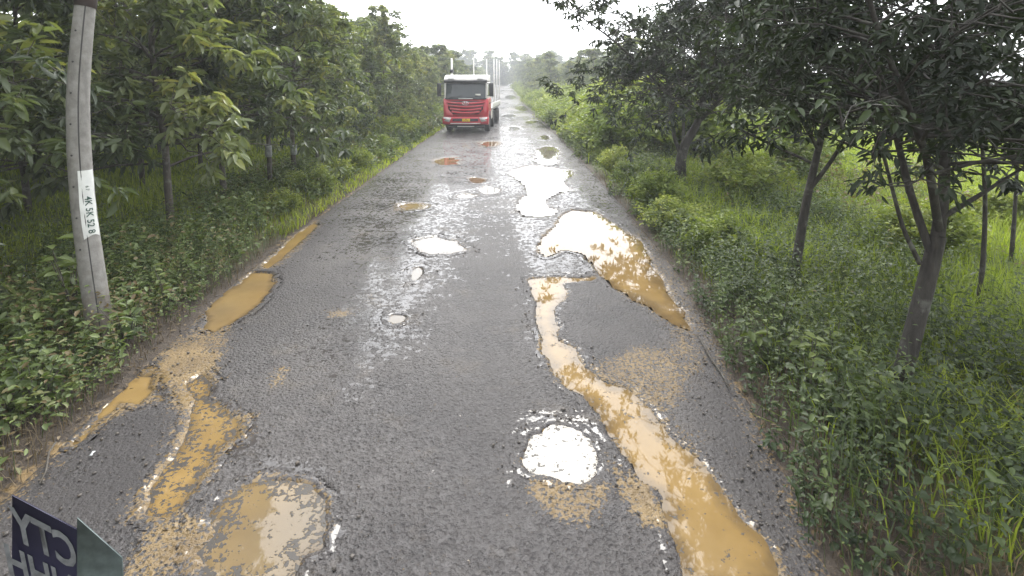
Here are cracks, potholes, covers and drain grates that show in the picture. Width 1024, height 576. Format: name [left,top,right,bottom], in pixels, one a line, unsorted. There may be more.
pothole [498,164,583,221]
pothole [194,269,283,337]
pothole [391,201,438,213]
pothole [403,233,476,256]
pothole [250,220,328,272]
pothole [525,207,707,338]
pothole [401,264,432,284]
pothole [423,156,471,166]
pothole [523,146,570,166]
pothole [523,273,802,576]
pothole [125,367,254,534]
pothole [58,368,164,454]
